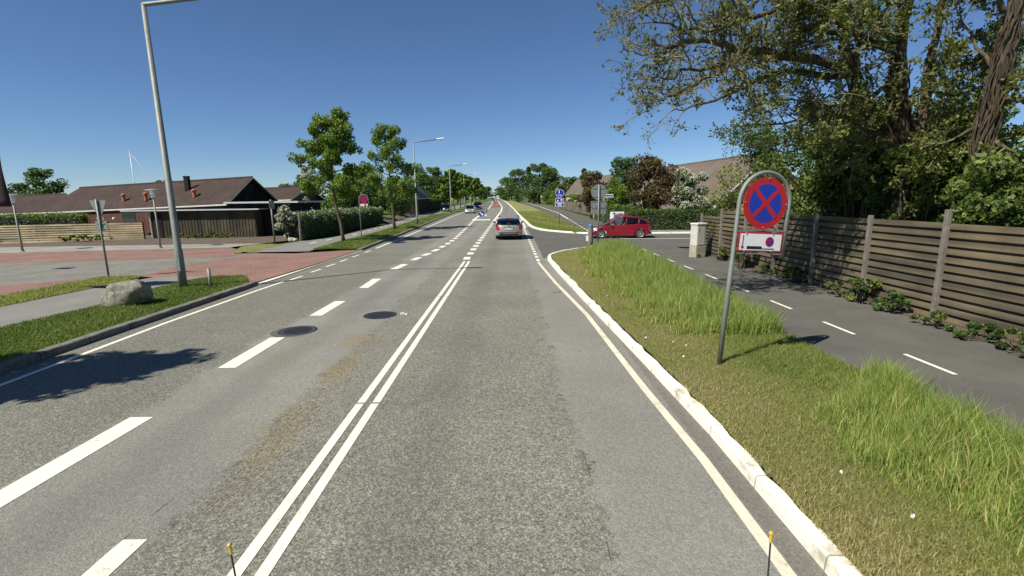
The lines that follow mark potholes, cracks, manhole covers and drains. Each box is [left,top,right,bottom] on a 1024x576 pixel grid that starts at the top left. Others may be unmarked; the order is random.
manhole cover [363,311,397,319]
manhole cover [277,326,318,336]
